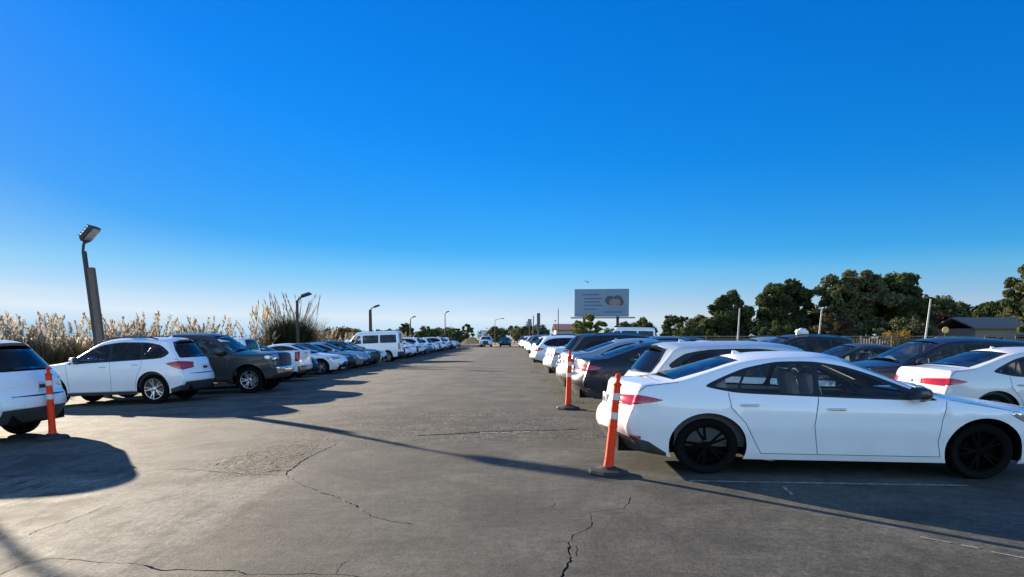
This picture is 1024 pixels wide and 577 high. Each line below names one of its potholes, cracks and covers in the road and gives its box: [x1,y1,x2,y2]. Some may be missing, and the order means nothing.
crack [2,558,358,577]
crack [168,445,413,525]
crack [548,498,631,577]
